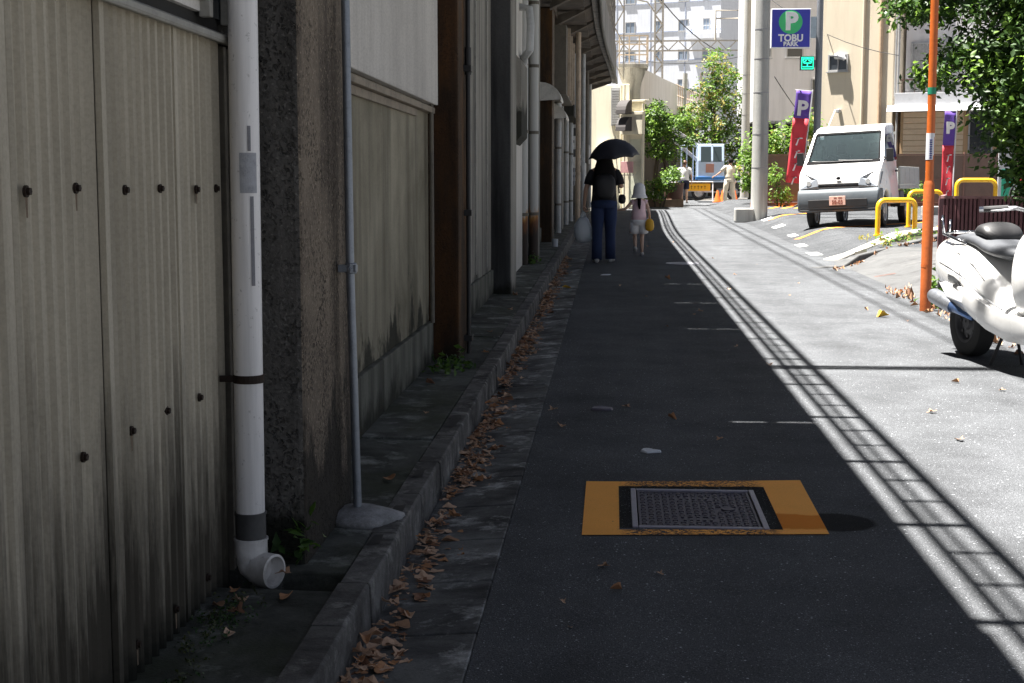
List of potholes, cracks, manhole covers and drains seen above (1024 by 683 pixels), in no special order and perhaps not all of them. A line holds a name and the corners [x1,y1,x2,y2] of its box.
manhole cover [619,486,783,530]
